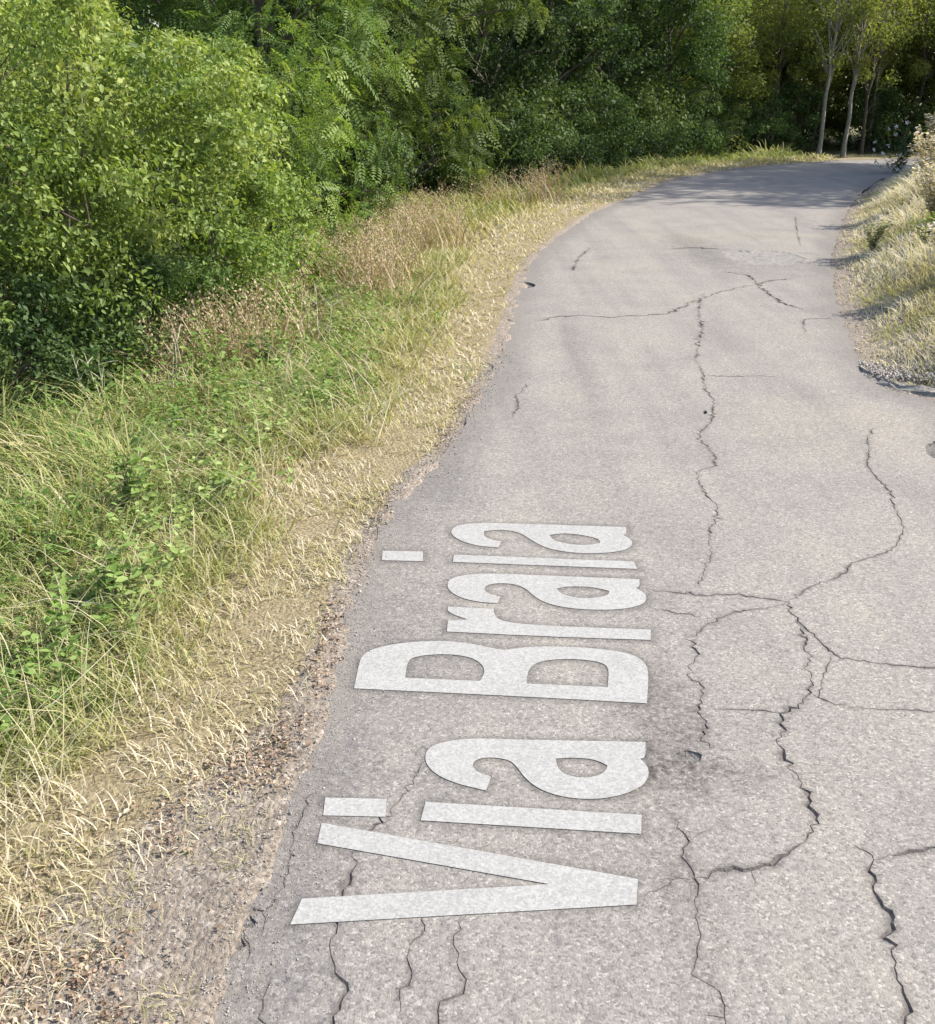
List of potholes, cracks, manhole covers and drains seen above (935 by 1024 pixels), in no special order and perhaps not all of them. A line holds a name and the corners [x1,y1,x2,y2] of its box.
crack [539,272,935,1024]
crack [213,791,316,1024]
crack [329,749,428,1024]
crack [398,914,467,1024]
